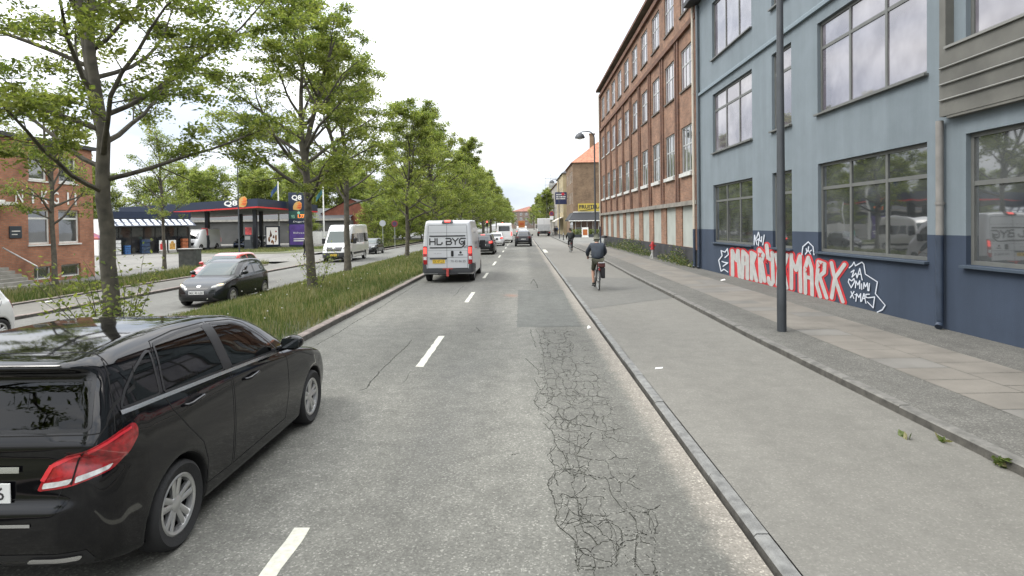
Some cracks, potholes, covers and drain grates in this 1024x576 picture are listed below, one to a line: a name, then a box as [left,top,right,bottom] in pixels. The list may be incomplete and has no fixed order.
crack [527,328,663,576]
crack [362,340,412,390]
